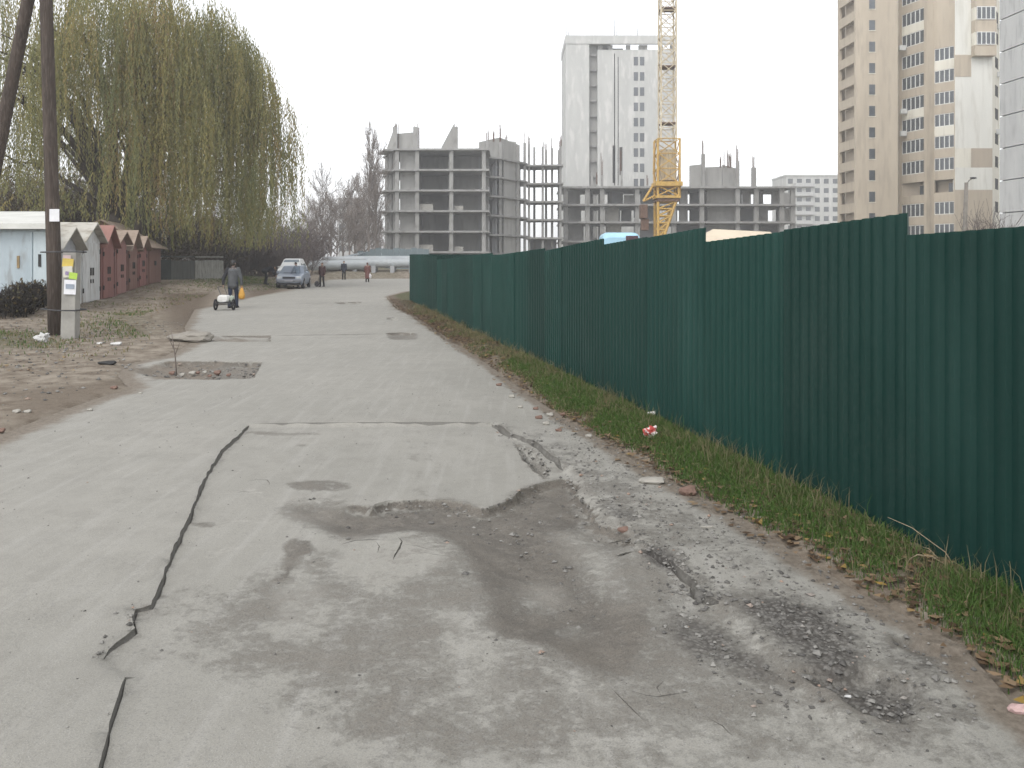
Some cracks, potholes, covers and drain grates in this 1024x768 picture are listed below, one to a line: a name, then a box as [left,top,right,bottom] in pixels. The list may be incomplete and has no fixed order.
crack [104,422,563,659]
pothole [271,478,669,683]
pothole [787,661,925,725]
crack [98,677,135,768]
crack [608,540,719,606]
